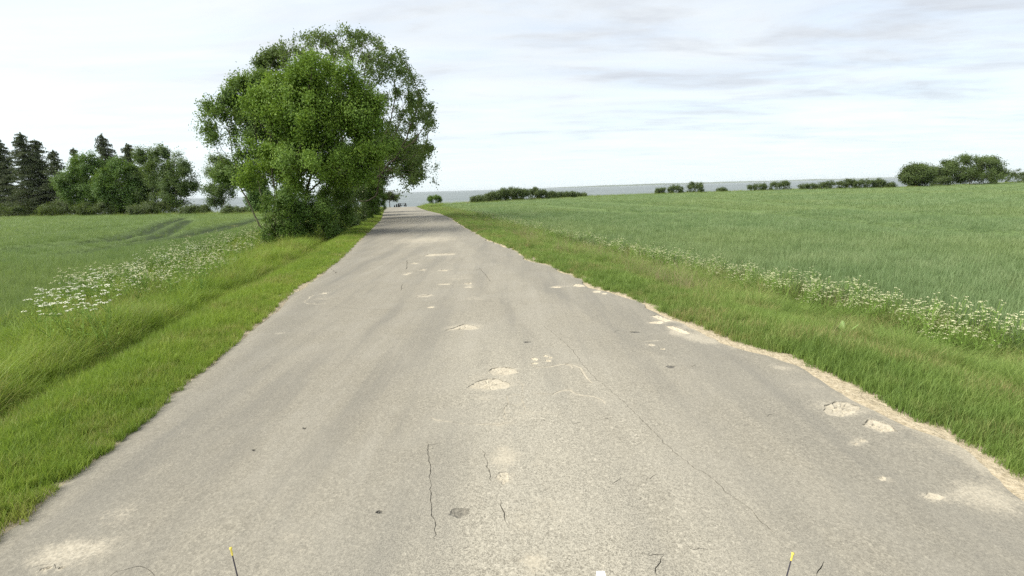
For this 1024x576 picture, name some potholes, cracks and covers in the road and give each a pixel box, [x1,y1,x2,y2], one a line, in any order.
pothole [489,367,518,376]
crack [430,326,774,533]
pothole [467,378,510,390]
pothole [862,419,897,432]
pothole [823,401,860,417]
